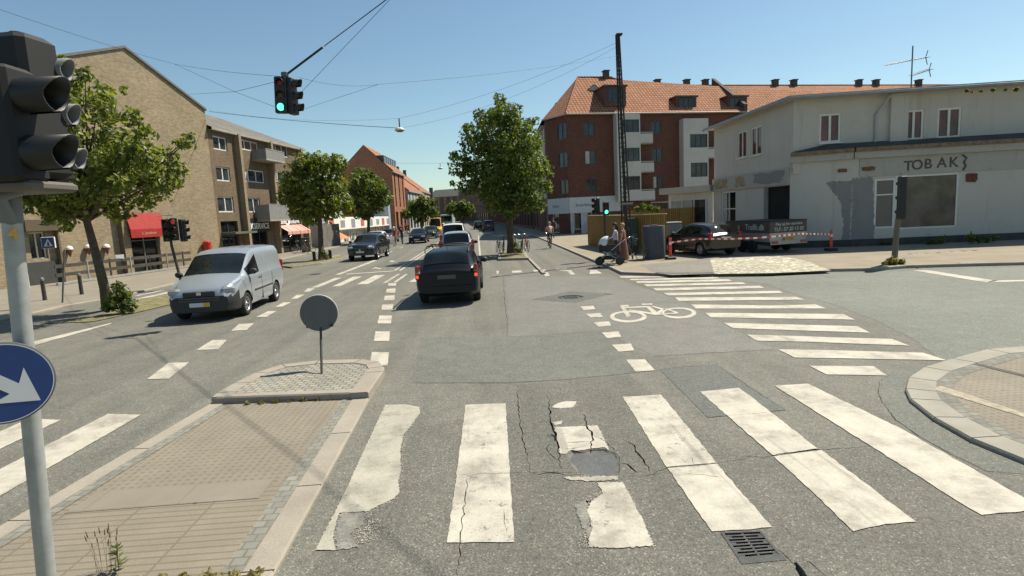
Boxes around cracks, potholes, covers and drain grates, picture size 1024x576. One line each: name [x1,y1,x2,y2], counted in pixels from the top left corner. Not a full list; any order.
drain grate [721,530,786,565]
crack [517,394,727,482]
crack [456,481,468,572]
pothole [567,449,620,476]
